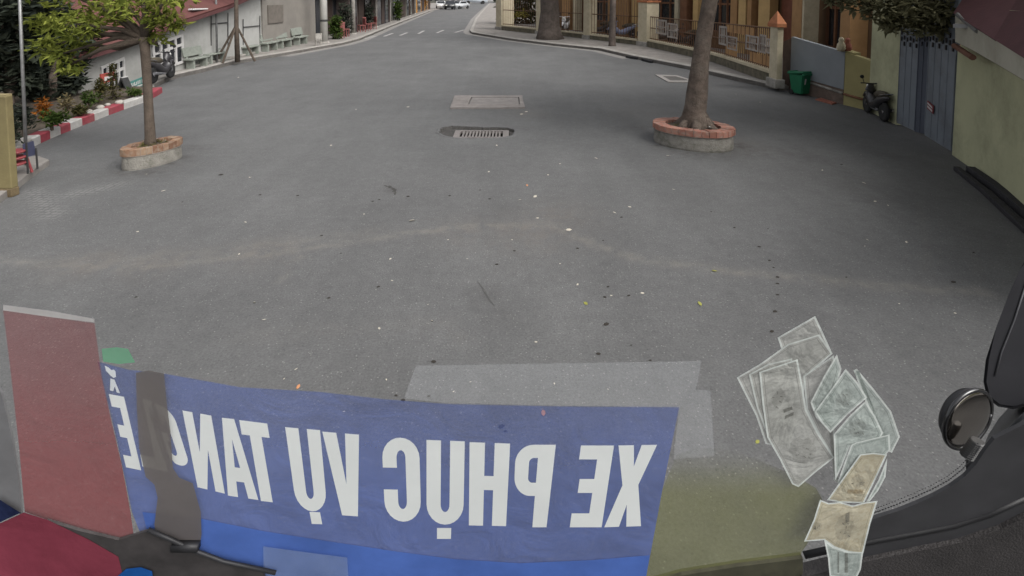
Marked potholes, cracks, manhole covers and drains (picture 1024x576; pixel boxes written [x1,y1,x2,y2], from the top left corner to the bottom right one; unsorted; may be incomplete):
manhole cover [450,95,525,109]
drain grate [453,130,509,138]
manhole cover [655,75,688,83]
